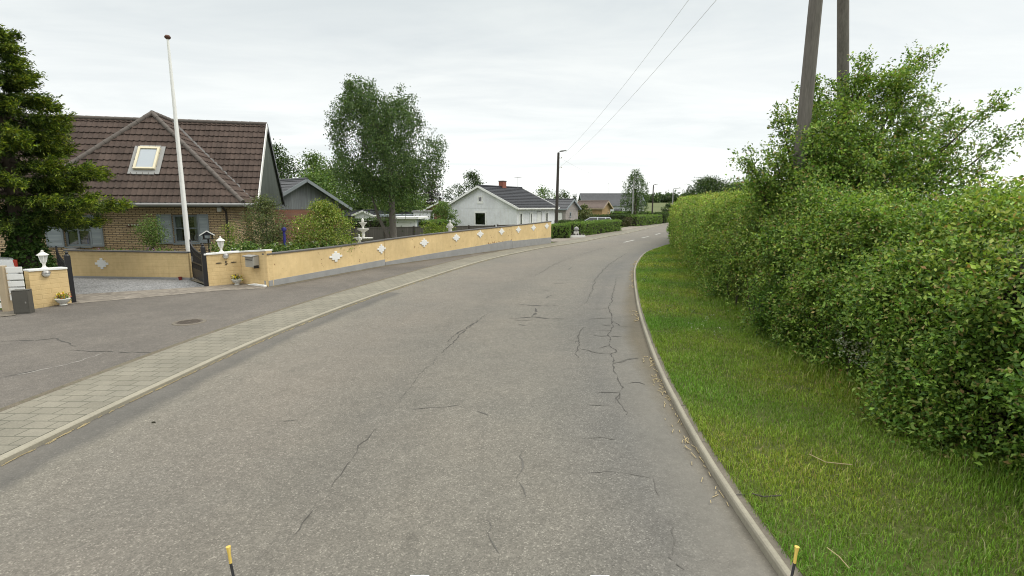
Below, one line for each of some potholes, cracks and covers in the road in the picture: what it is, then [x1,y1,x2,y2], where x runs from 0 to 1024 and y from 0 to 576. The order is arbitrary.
crack [575,254,643,415]
crack [519,267,572,326]
crack [17,338,151,353]
